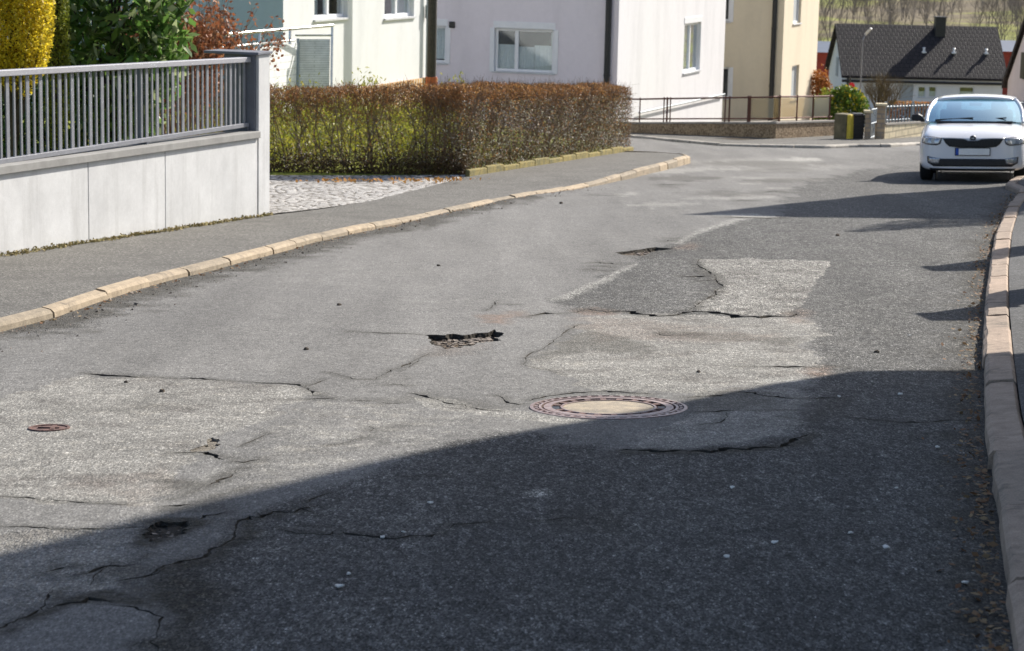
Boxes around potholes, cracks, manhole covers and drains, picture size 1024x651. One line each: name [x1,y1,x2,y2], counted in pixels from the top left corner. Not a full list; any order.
pothole [142,521,190,542]
manhole cover [28,424,70,432]
manhole cover [529,395,688,420]
crack [0,434,489,650]
pothole [426,329,504,349]
crack [86,354,649,411]
crack [614,391,826,453]
pothole [615,247,669,256]
